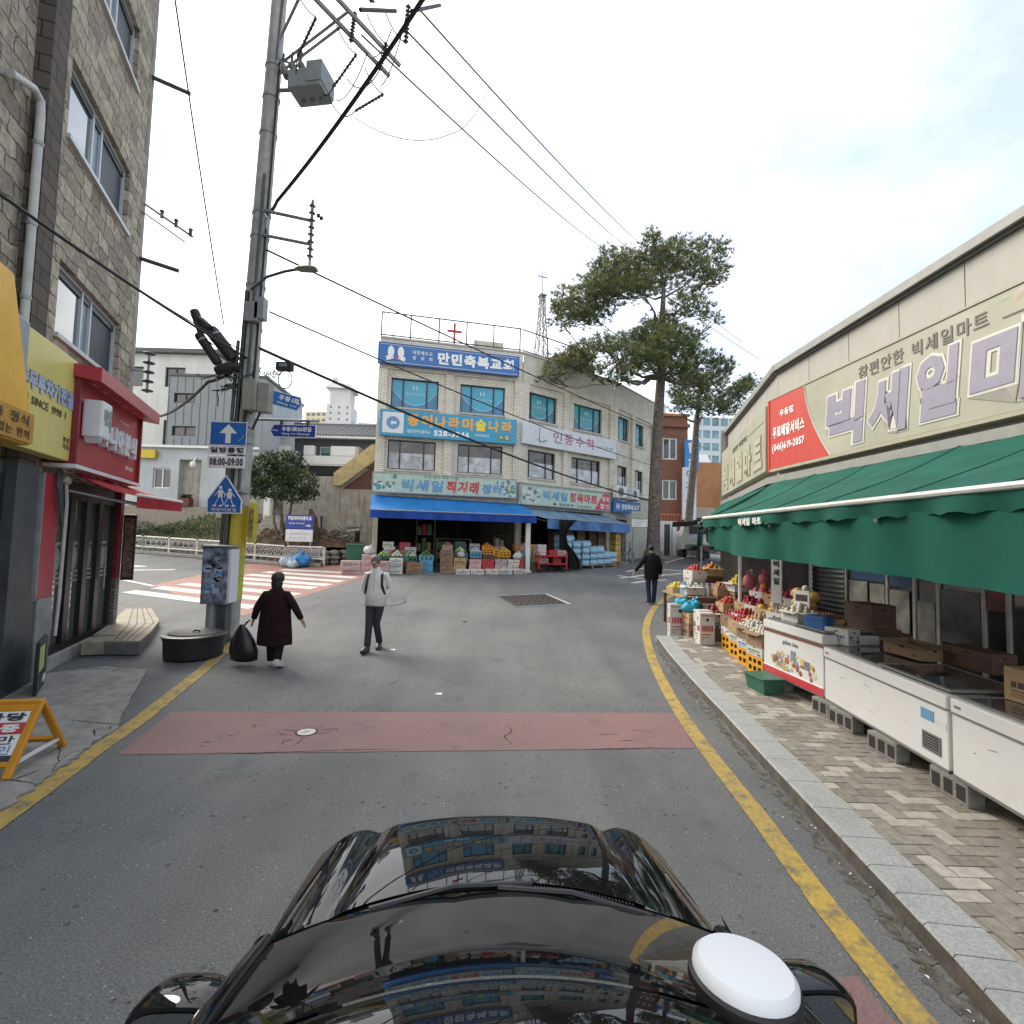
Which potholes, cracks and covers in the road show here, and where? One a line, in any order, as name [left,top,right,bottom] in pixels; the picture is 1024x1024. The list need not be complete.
drain grate [497,593,572,607]
manhole cover [295,728,318,736]
crack [0,719,121,784]
crack [200,726,395,753]
